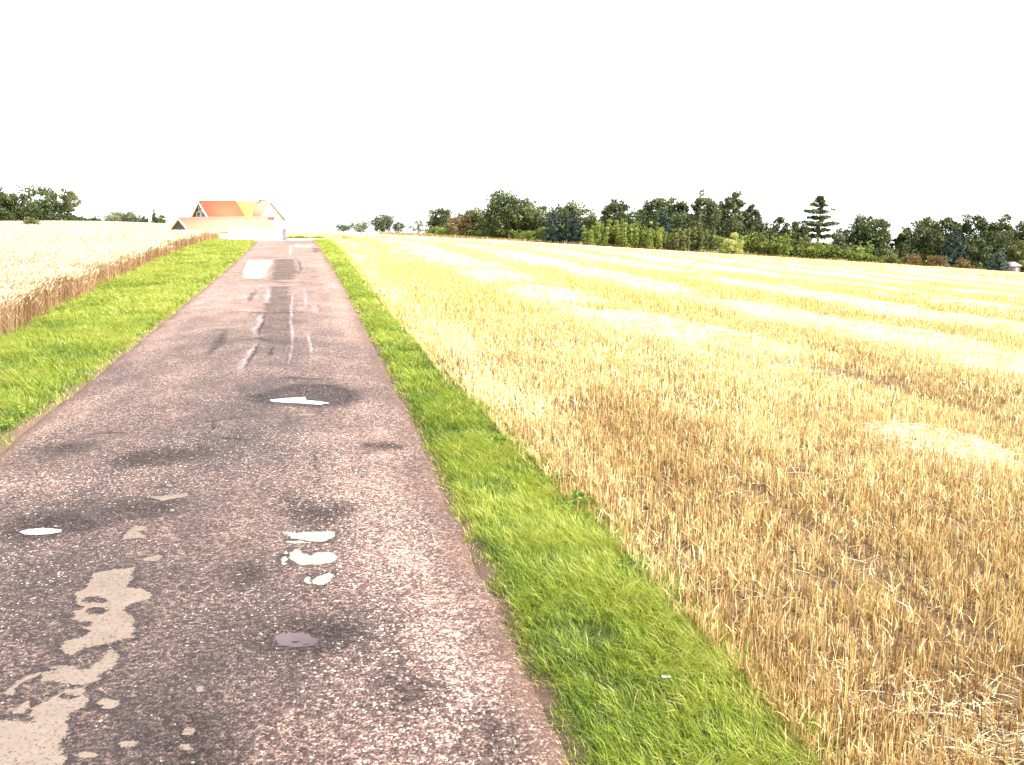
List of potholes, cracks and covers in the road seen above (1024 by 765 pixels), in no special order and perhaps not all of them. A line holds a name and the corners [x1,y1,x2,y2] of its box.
pothole [263,385,359,407]
pothole [126,453,192,463]
pothole [265,621,353,655]
crack [239,281,313,369]
pothole [8,516,102,540]
